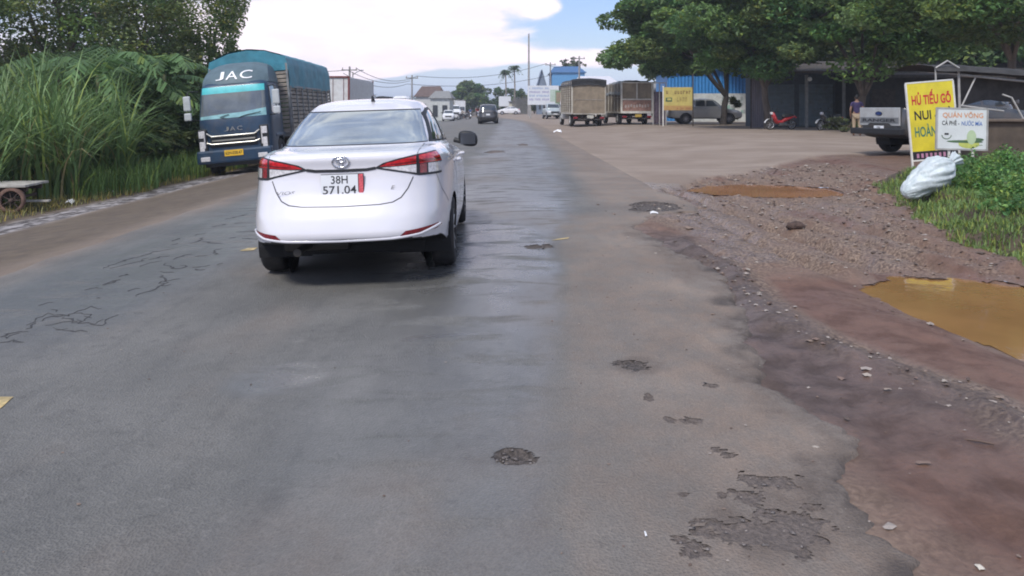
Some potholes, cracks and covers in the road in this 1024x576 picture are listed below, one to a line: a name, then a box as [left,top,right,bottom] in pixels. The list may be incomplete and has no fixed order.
pothole [687,184,849,198]
pothole [611,360,651,372]
pothole [796,503,824,515]
crack [0,214,255,343]
pothole [688,510,838,562]
pothole [711,447,738,458]
pothole [727,475,803,514]
pothole [679,417,703,425]
pothole [491,448,540,465]
pothole [670,534,713,559]
pothole [858,276,1024,361]
